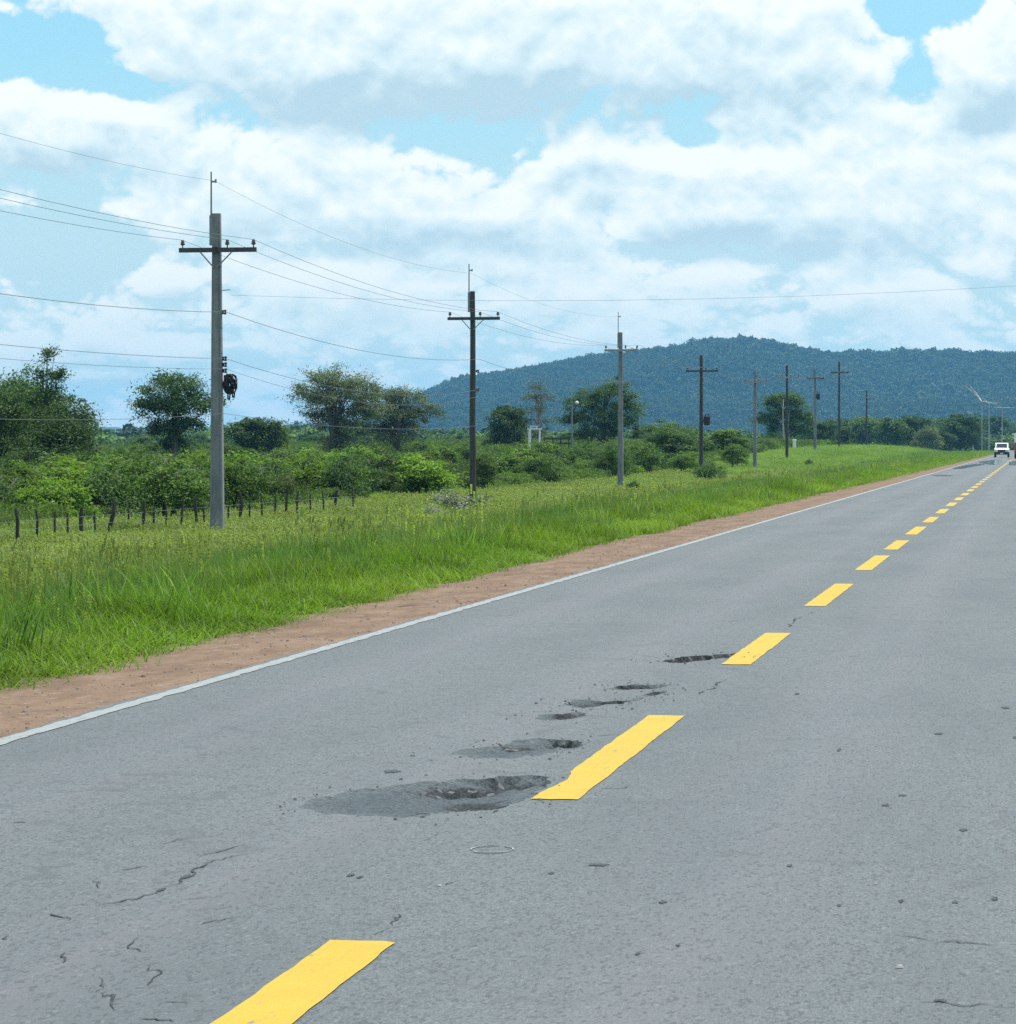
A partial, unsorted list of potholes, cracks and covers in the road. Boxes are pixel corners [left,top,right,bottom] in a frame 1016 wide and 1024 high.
pothole [561,698,644,708]
pothole [449,738,584,759]
pothole [535,712,587,720]
crack [96,976,116,1011]
crack [32,846,252,920]
pothole [299,775,551,818]
pothole [663,653,736,663]
crack [127,935,163,984]
